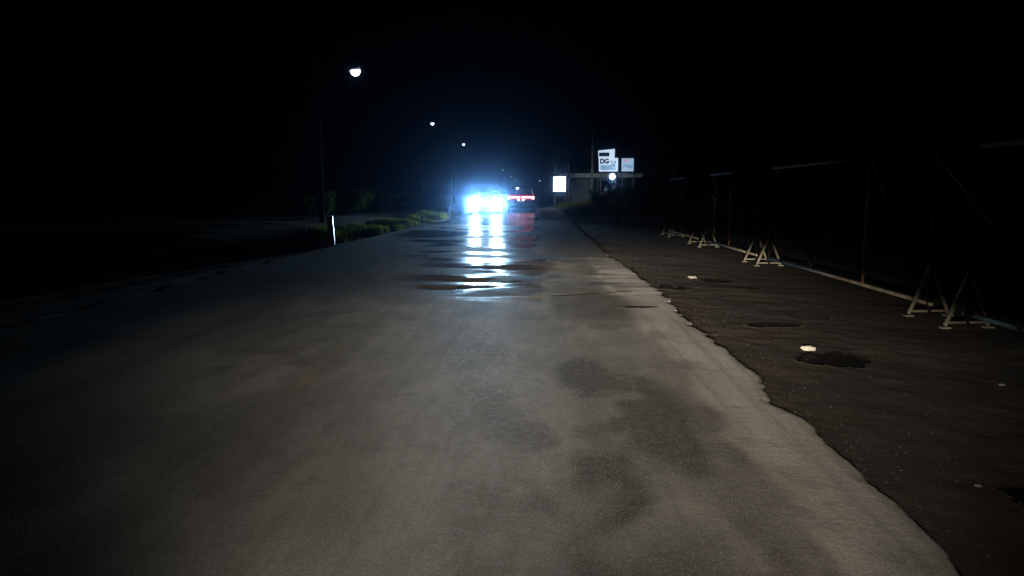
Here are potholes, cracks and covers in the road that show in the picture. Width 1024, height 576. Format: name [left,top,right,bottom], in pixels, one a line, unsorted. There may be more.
pothole [789,351,877,369]
pothole [993,485,1024,507]
